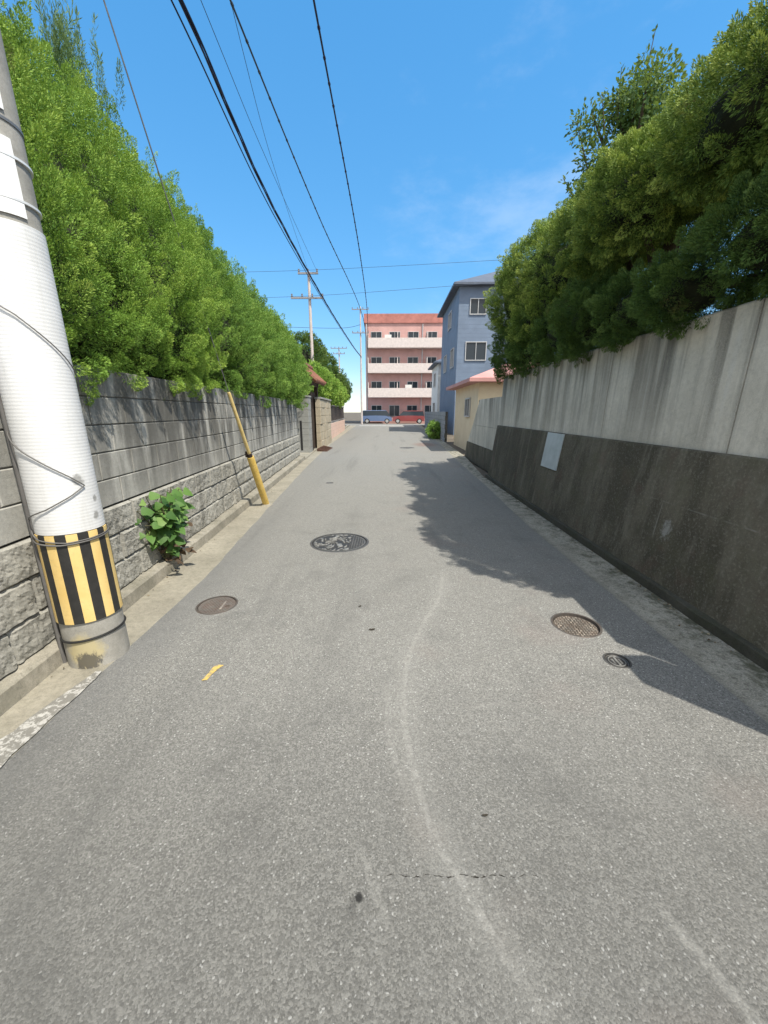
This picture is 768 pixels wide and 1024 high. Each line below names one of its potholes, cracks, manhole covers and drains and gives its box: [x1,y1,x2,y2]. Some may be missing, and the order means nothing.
manhole cover [195,596,238,615]
manhole cover [550,613,603,638]
manhole cover [602,653,632,669]
manhole cover [310,533,369,552]
